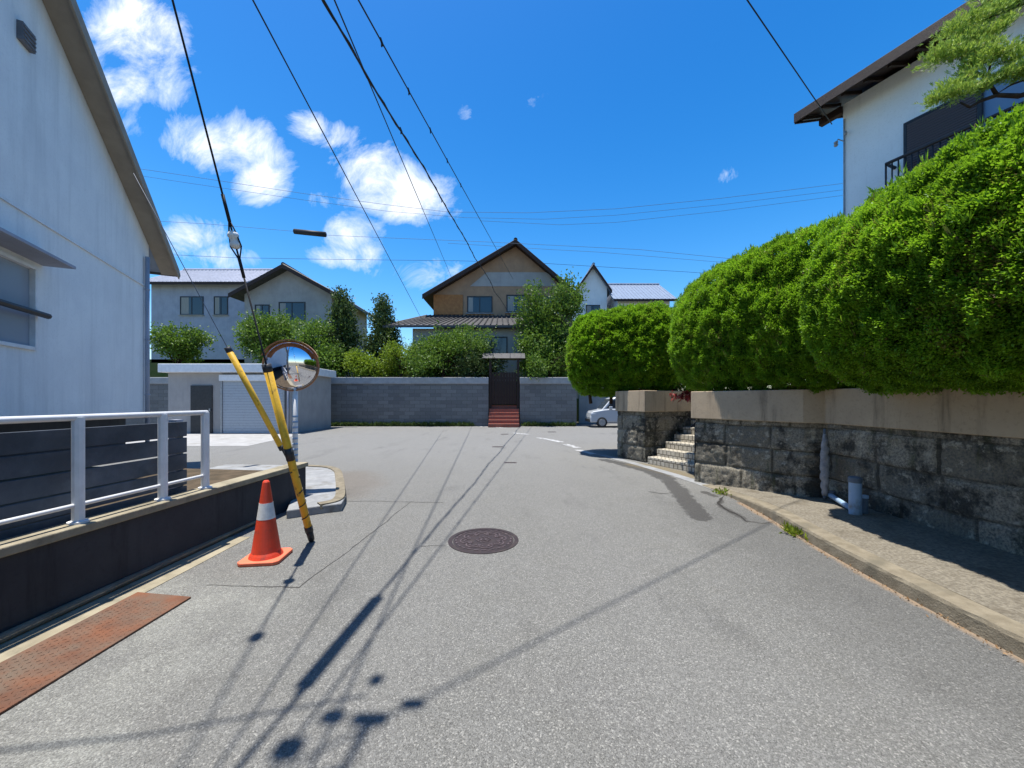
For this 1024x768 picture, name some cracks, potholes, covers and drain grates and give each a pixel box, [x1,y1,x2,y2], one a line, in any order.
manhole cover [448,528,519,554]
crack [717,496,772,523]
